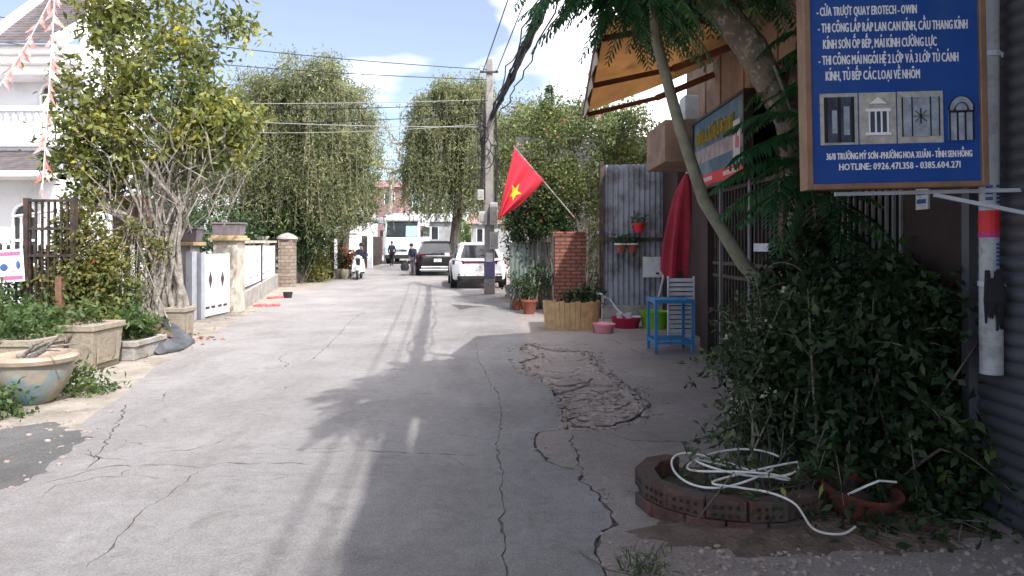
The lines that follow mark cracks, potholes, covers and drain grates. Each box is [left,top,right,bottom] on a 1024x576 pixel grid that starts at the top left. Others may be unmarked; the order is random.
crack [475,343,508,576]
crack [521,340,734,576]
pothole [555,383,645,429]
crack [21,404,334,568]
